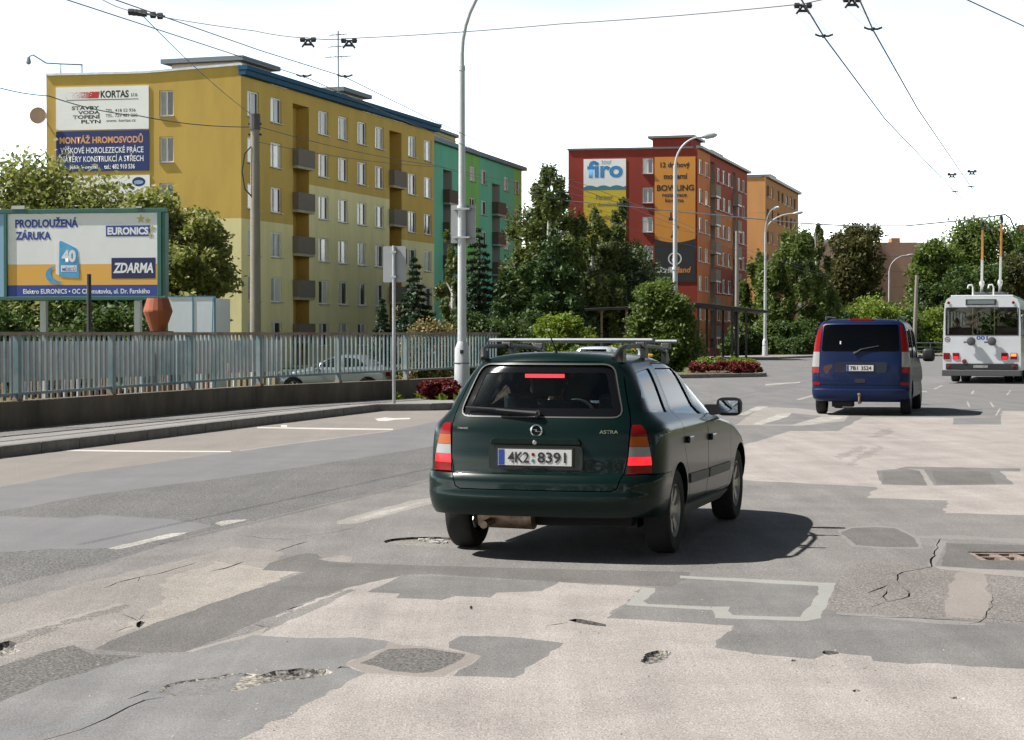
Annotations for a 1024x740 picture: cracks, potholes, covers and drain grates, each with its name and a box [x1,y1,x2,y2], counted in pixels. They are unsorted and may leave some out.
crack [825,539,1021,624]
pothole [641,650,672,664]
pothole [158,668,332,696]
pothole [0,641,20,658]
crack [45,691,161,740]
